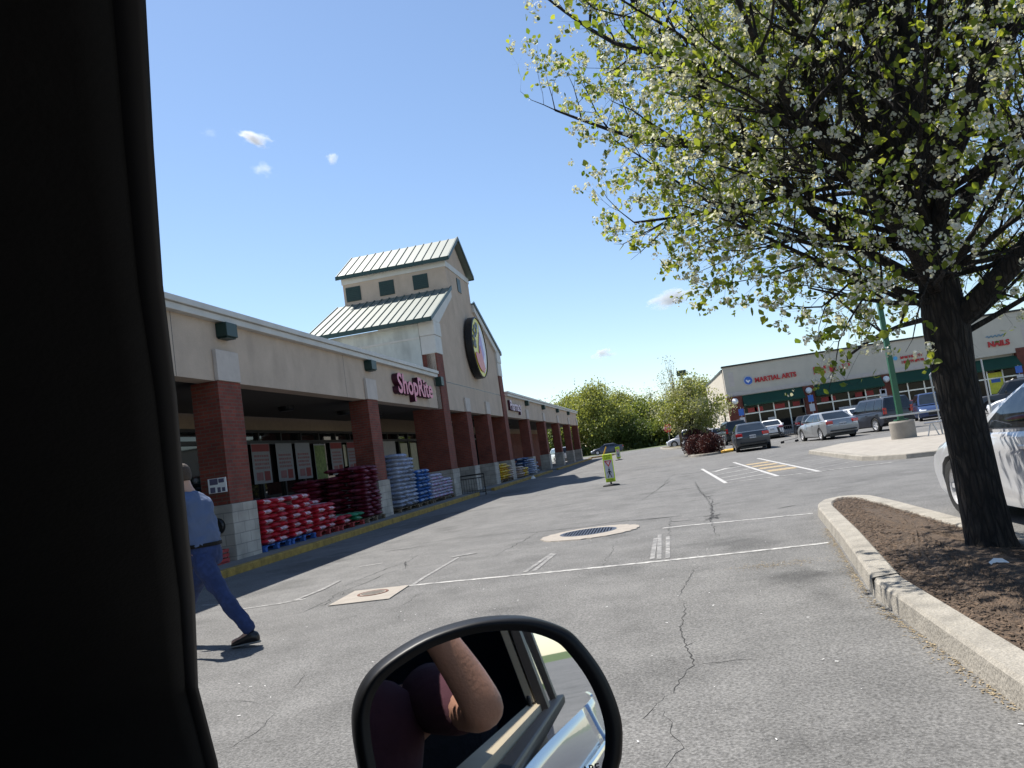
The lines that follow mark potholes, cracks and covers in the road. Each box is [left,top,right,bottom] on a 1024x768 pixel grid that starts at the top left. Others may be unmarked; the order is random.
crack [508,466,735,549]
drain grate [540,524,640,542]
crack [646,567,751,767]
manhole cover [328,585,409,607]
